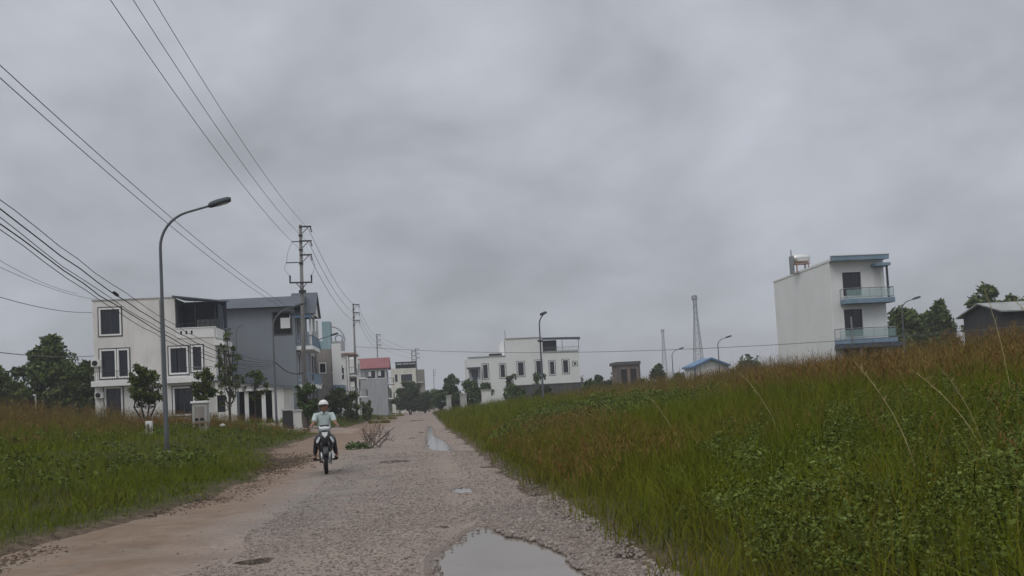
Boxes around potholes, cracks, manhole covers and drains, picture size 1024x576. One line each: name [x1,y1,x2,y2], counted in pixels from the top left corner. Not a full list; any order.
pothole [225,556,283,567]
pothole [422,426,456,451]
pothole [419,524,607,576]
pothole [445,487,479,495]
